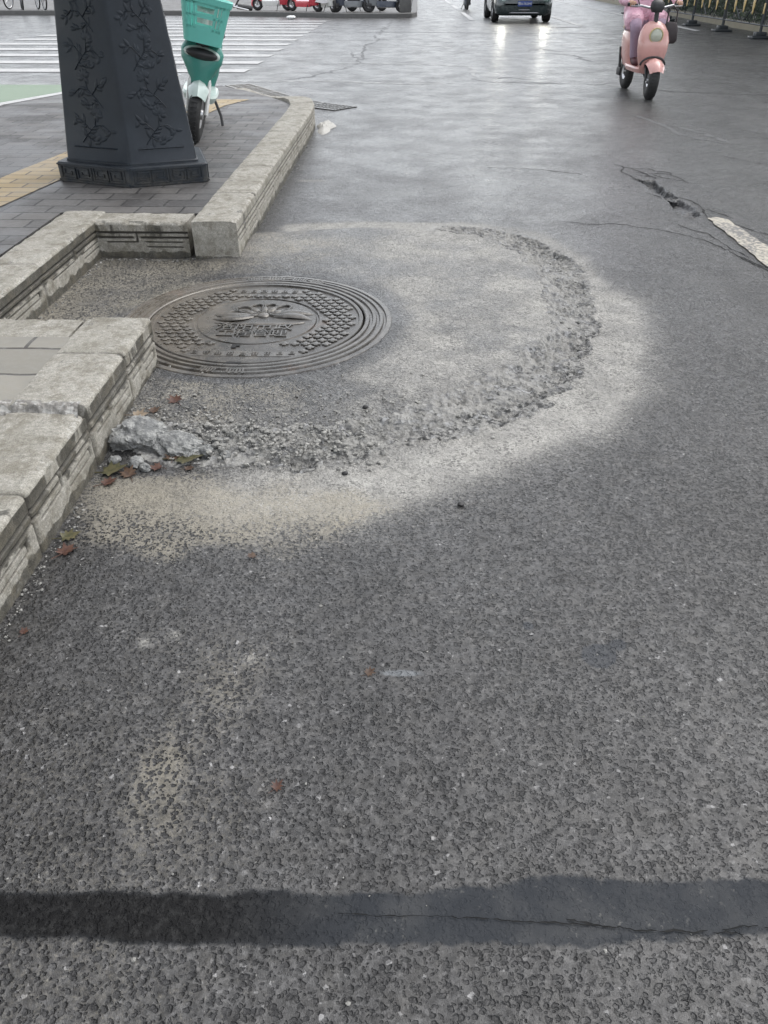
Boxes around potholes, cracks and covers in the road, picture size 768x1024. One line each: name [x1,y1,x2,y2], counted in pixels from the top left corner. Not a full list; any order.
crack [287,20,393,80]
manhole cover [125,276,392,379]
crack [574,164,768,271]
crack [338,913,768,939]
